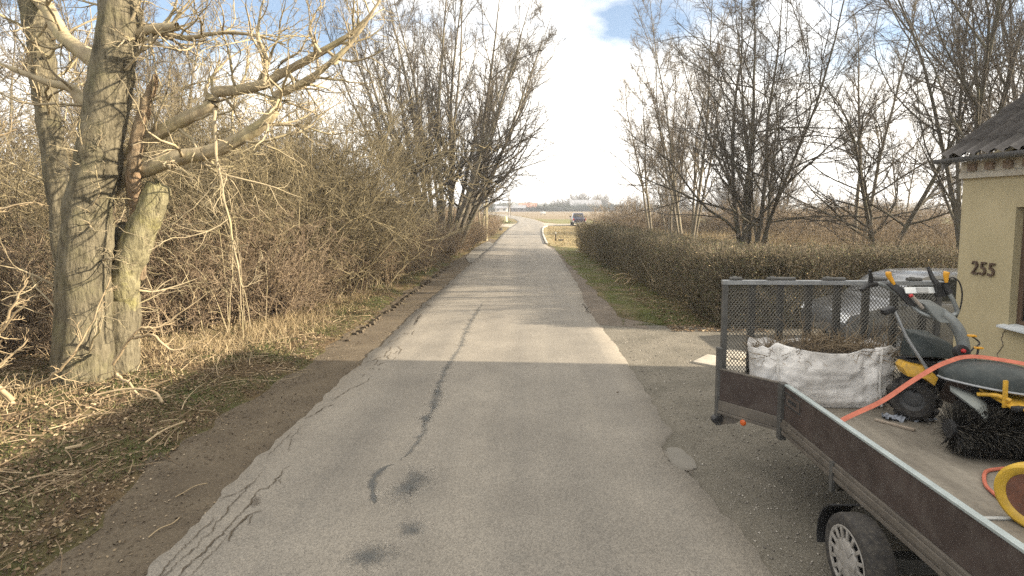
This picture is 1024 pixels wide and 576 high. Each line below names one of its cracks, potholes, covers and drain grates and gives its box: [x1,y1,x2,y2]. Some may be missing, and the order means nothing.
crack [158,331,414,576]
